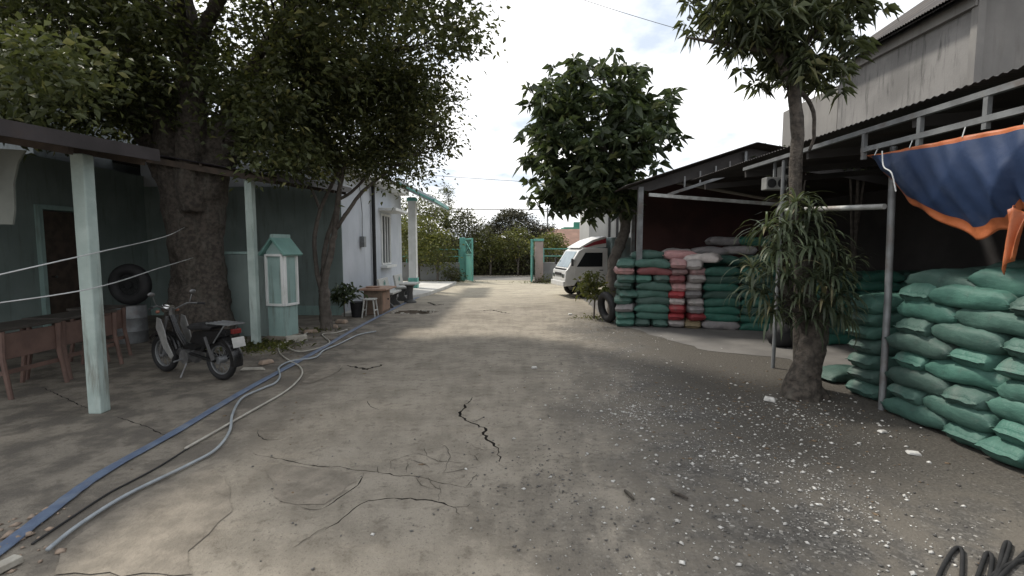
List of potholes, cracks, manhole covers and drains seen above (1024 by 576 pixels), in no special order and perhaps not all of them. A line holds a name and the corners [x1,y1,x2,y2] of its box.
crack [253,398,501,546]
